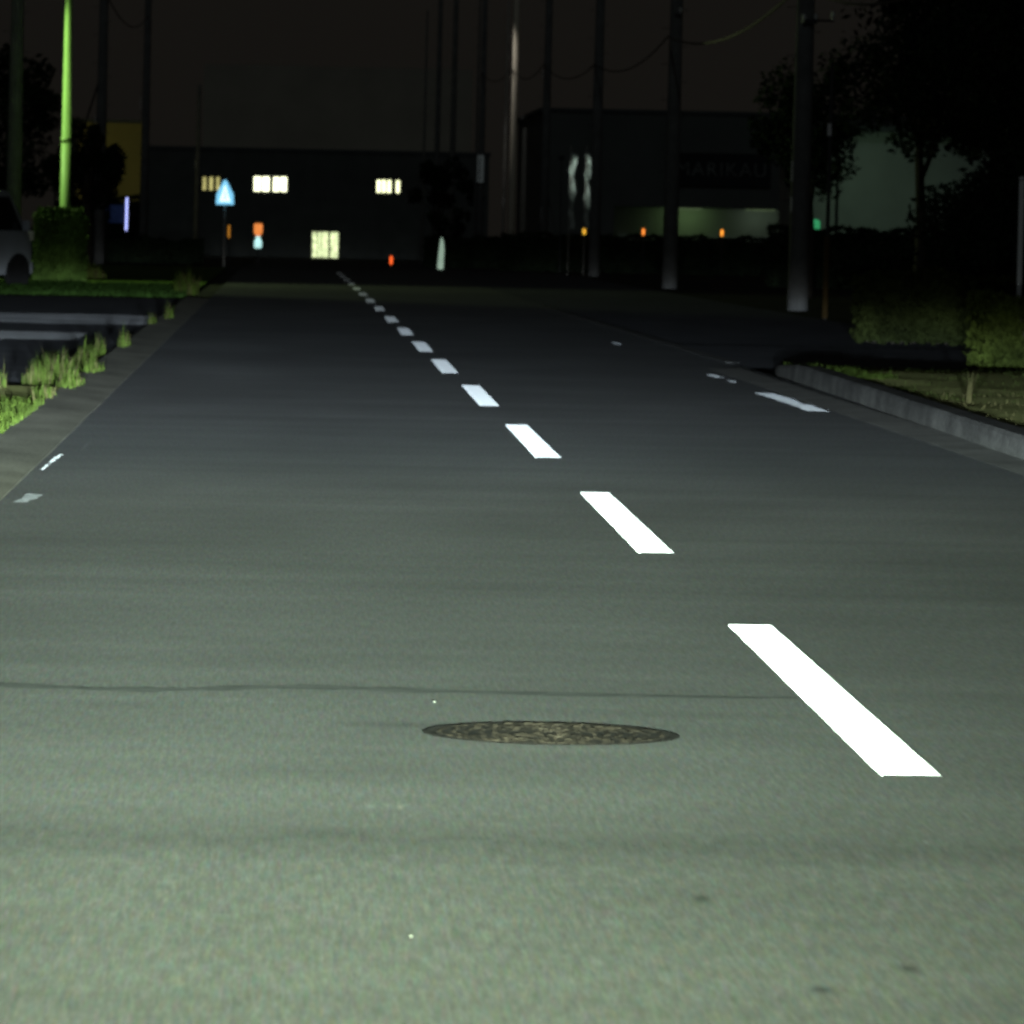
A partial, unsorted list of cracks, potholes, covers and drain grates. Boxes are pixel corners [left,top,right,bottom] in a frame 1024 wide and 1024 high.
manhole cover [422,722,680,745]
